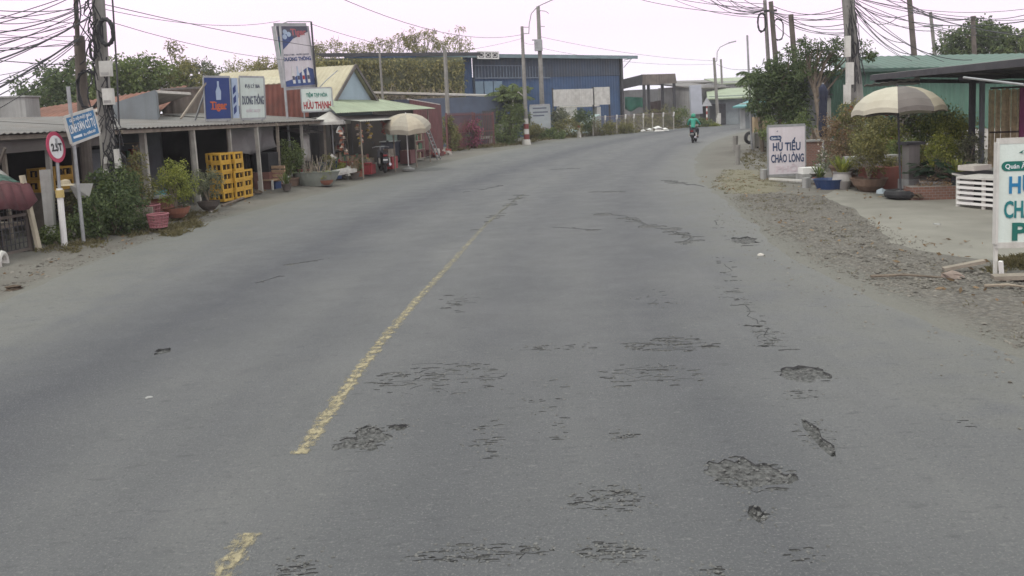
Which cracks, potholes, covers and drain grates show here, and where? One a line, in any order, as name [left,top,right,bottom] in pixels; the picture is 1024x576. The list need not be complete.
crack [555,213,705,245]
pothole [322,423,406,452]
crack [257,258,330,283]
pothole [792,419,852,460]
pothole [775,365,838,383]
pothole [737,502,786,529]
pothole [703,455,799,494]
